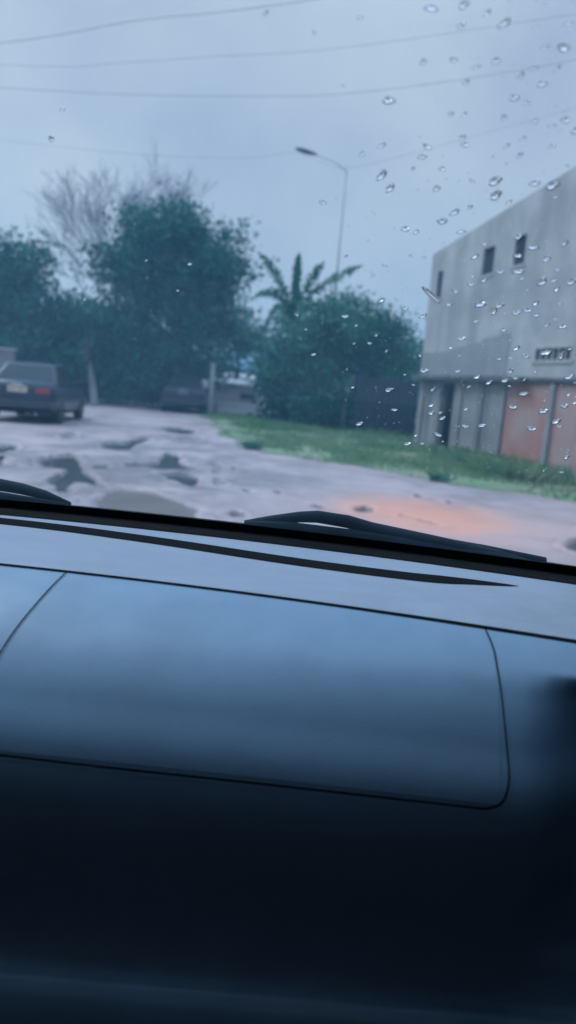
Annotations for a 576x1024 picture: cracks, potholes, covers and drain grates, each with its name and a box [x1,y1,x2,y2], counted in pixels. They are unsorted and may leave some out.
pothole [149,470,207,489]
pothole [76,485,219,520]
pothole [115,451,205,472]
pothole [93,436,161,451]
pothole [27,452,115,496]
pothole [155,425,203,435]
